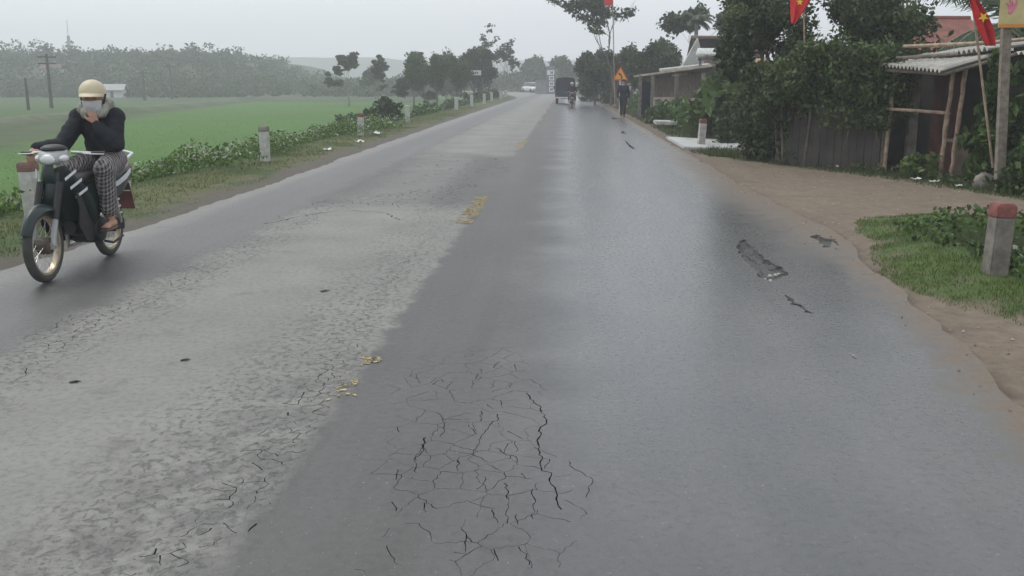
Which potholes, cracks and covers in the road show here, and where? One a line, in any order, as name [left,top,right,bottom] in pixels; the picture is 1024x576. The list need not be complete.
pothole [736,240,789,280]
crack [355,351,576,574]
pothole [810,235,839,248]
crack [119,256,411,576]
crack [1,215,314,383]
